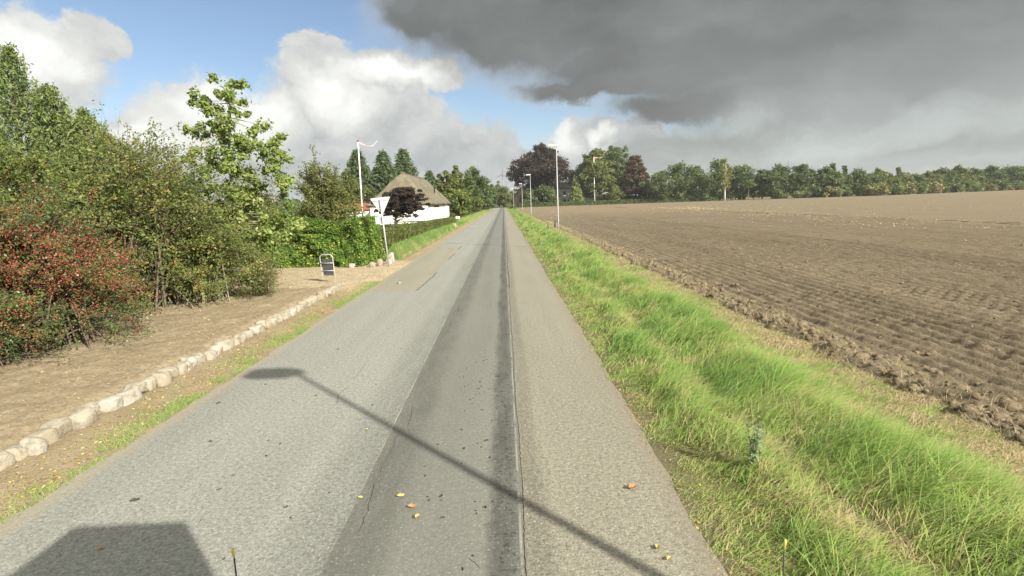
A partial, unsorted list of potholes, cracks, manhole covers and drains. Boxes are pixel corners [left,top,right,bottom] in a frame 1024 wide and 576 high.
crack [355,305,460,535]
